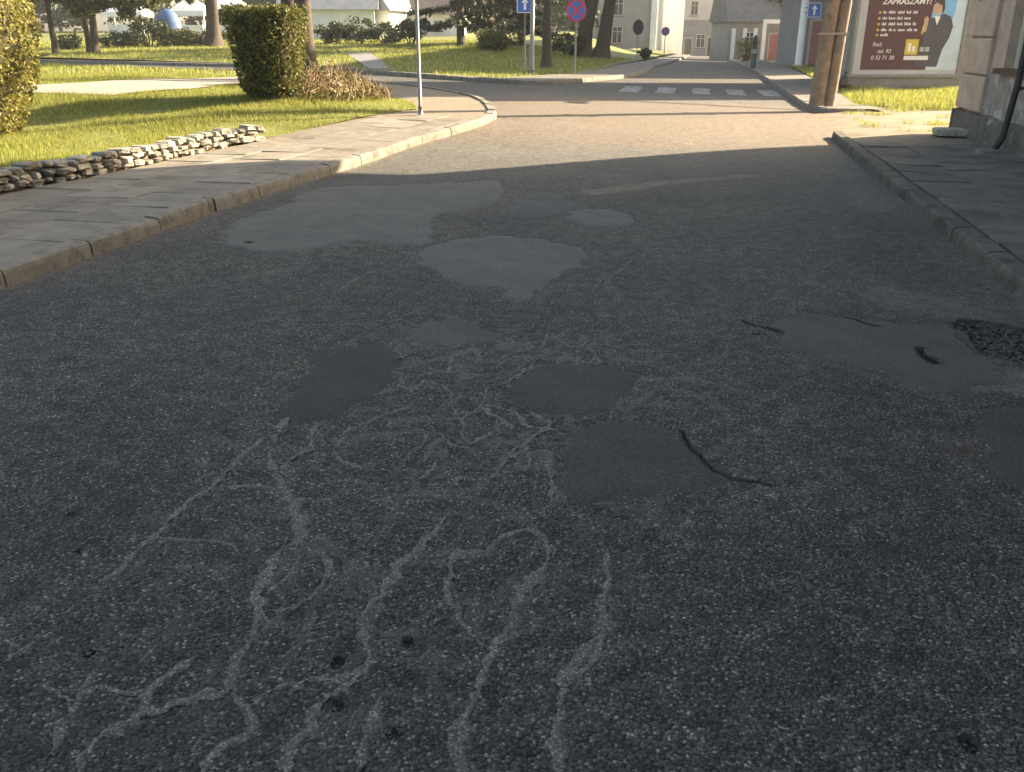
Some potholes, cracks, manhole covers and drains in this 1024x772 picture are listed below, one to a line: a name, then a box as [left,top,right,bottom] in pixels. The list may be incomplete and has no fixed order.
crack [3,271,699,772]
crack [680,431,777,487]
pothole [948,319,1024,364]
crack [740,320,784,335]
